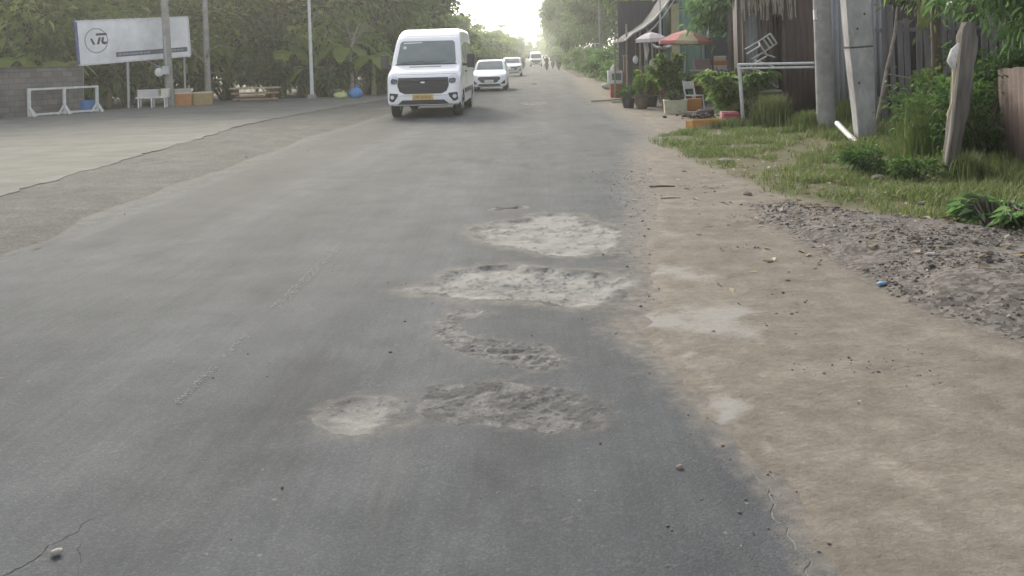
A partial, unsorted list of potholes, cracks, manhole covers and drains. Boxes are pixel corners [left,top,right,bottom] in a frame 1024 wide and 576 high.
pothole [431,309,571,371]
crack [746,465,813,576]
crack [3,518,92,576]
pothole [401,264,643,309]
pothole [311,395,406,436]
pothole [415,381,609,435]
pothole [468,213,627,257]
